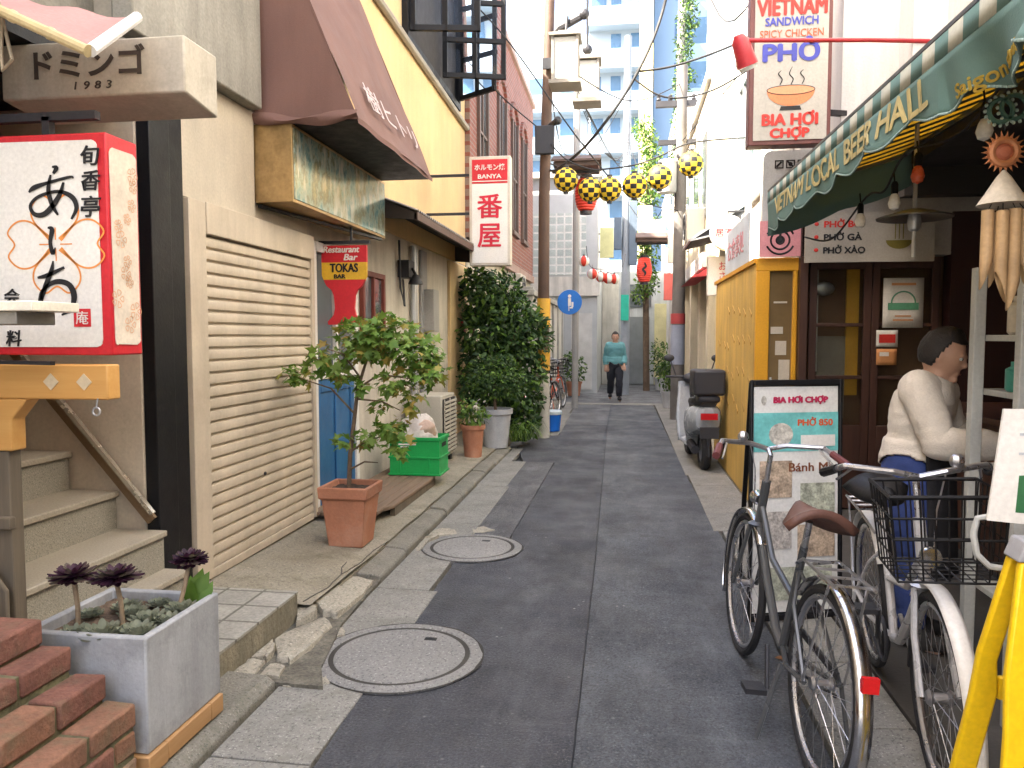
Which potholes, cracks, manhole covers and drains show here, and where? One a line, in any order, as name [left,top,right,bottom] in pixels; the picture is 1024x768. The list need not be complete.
manhole cover [422,534,524,567]
crack [303,541,388,602]
manhole cover [322,623,484,695]
